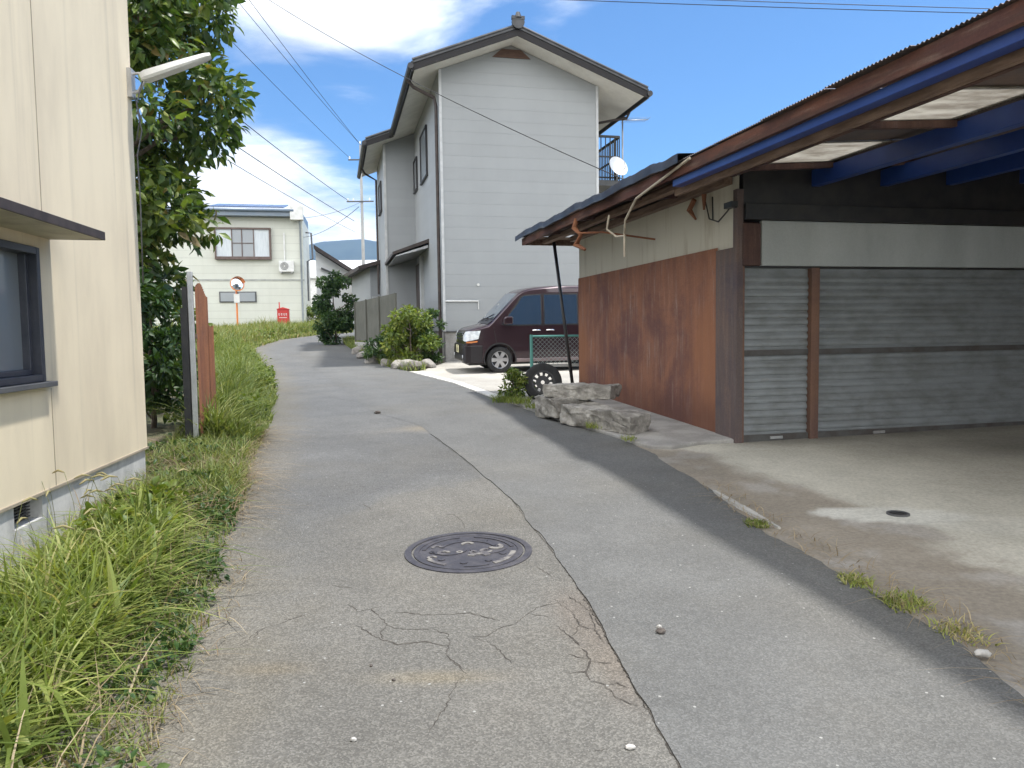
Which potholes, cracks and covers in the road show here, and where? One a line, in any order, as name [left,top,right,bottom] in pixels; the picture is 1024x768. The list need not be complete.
manhole cover [404,532,532,574]
crack [350,435,681,768]
